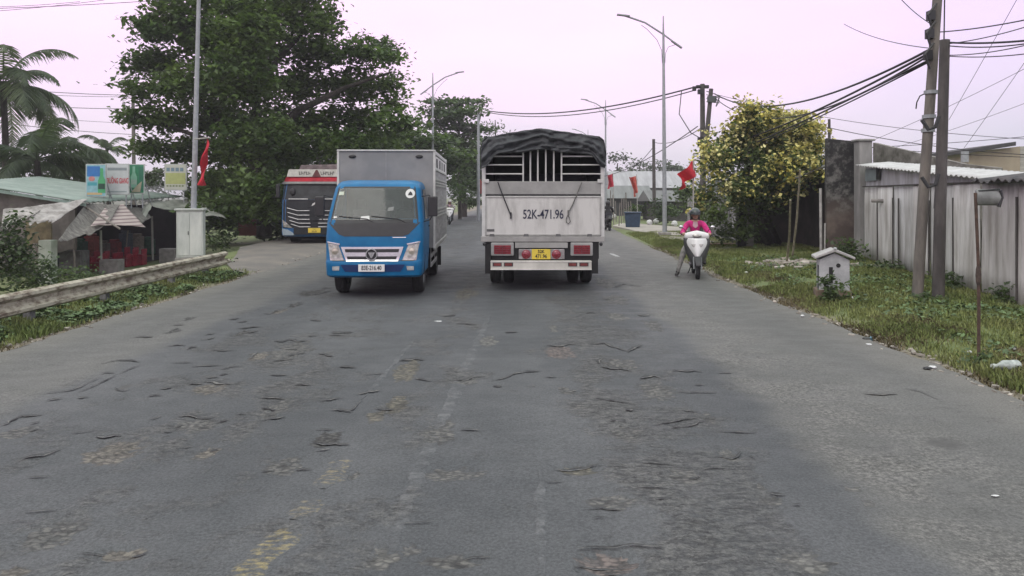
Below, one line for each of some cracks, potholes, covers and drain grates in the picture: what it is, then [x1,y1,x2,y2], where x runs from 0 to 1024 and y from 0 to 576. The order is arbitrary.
crack [454,370,576,392]
crack [0,359,138,431]
crack [136,287,394,450]
crack [550,342,715,392]
crack [657,409,702,427]
crack [862,388,939,399]
pothole [305,428,346,450]
